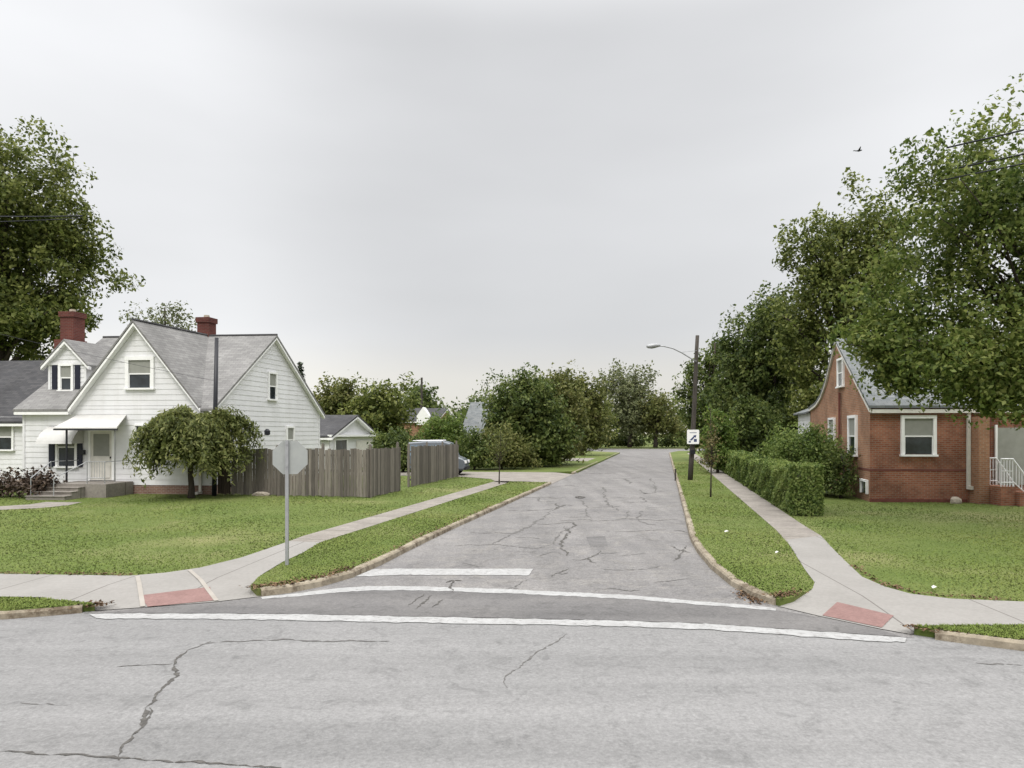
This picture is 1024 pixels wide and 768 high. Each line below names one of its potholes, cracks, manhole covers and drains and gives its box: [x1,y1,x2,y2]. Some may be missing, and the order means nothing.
crack [7,638,370,768]
crack [409,563,478,608]
crack [455,461,692,583]
crack [503,634,566,688]
